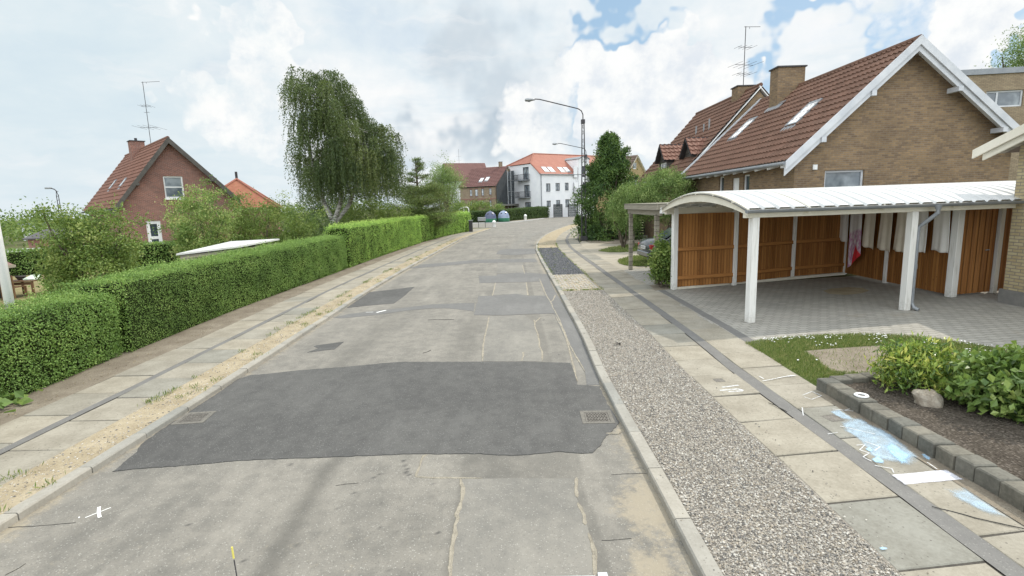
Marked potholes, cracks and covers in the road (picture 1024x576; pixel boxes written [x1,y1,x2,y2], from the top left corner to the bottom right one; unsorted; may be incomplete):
crack [521,265,585,381]
drain grate [580,410,615,424]
crack [447,478,465,576]
crack [574,477,632,575]
drain grate [171,411,216,425]
